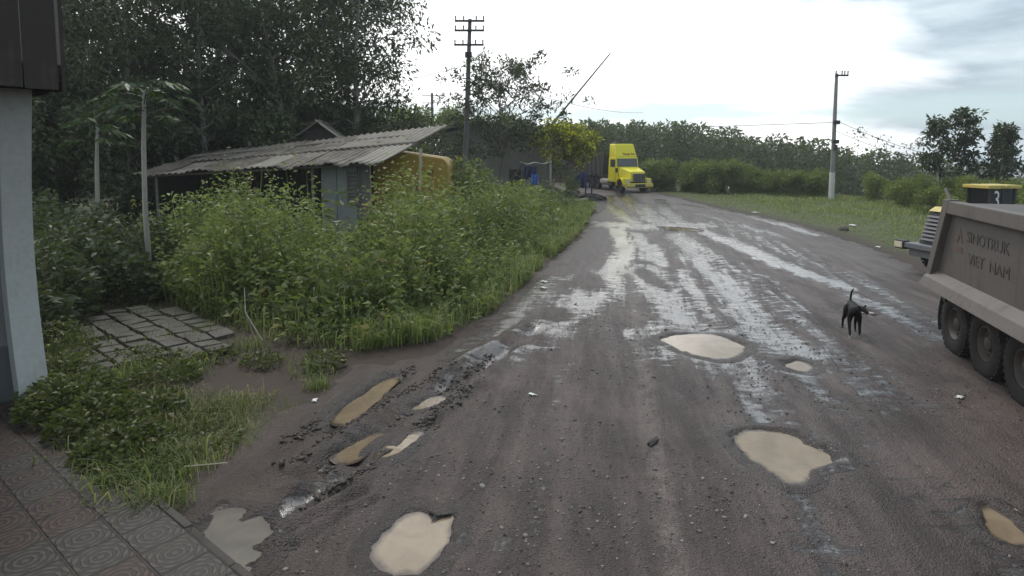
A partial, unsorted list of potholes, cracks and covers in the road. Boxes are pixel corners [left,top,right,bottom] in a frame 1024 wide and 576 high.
pothole [649,331,759,363]
pothole [716,423,861,493]
pothole [346,497,475,576]
pothole [957,494,1024,557]
pothole [768,355,826,376]
